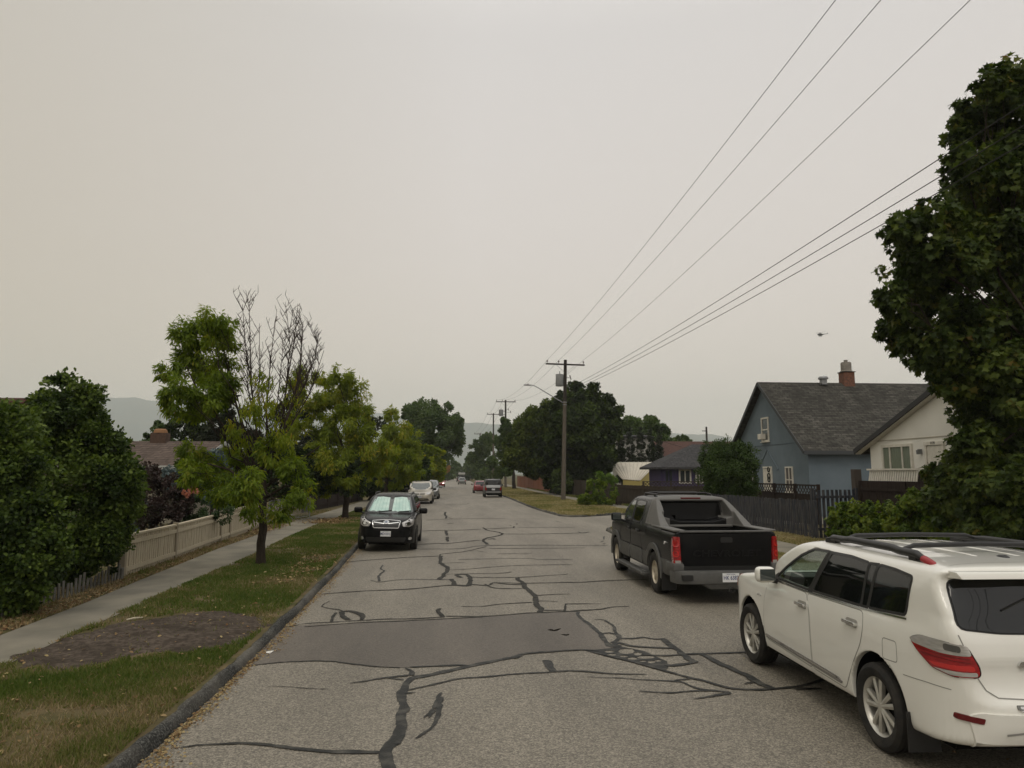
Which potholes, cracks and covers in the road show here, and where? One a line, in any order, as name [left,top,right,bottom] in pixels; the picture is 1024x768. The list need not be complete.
crack [325,504,646,612]
crack [409,660,731,699]
